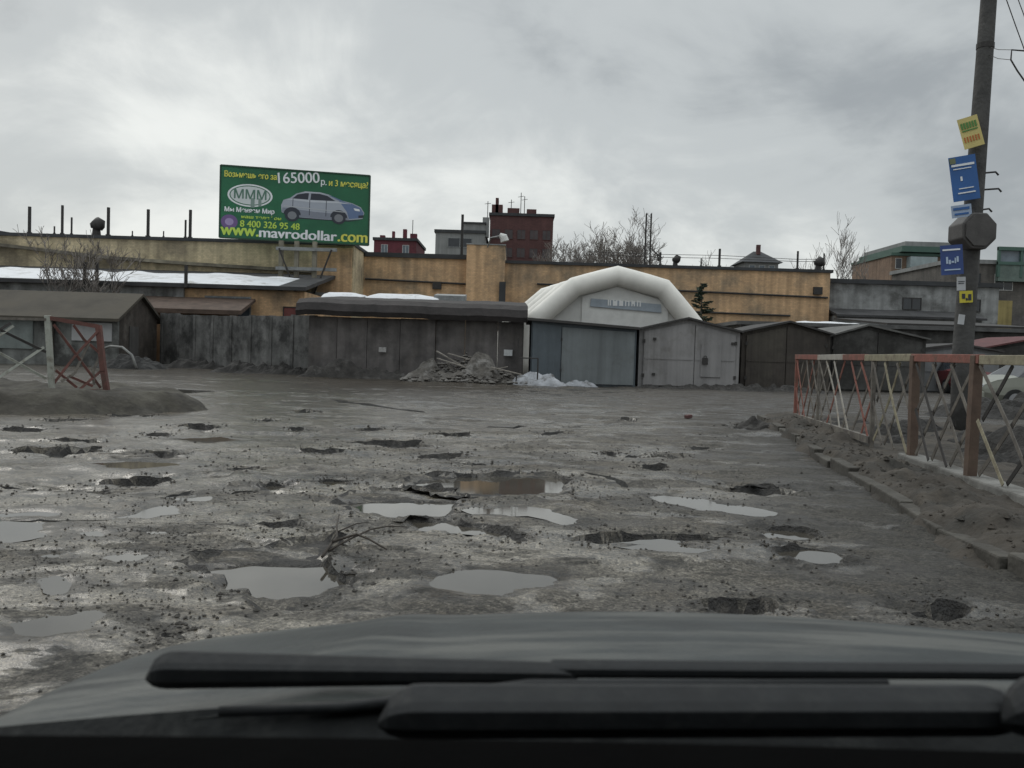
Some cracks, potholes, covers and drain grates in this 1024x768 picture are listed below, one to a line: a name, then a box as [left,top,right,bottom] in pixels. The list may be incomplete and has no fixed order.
pothole [910,598,974,621]
pothole [771,542,846,564]
pothole [175,530,363,611]
pothole [565,530,731,545]
pothole [723,483,798,496]
pothole [700,596,779,615]
pothole [350,439,433,449]
pothole [396,470,574,499]
pothole [99,476,173,487]
pothole [330,483,470,523]
pothole [10,445,103,458]
